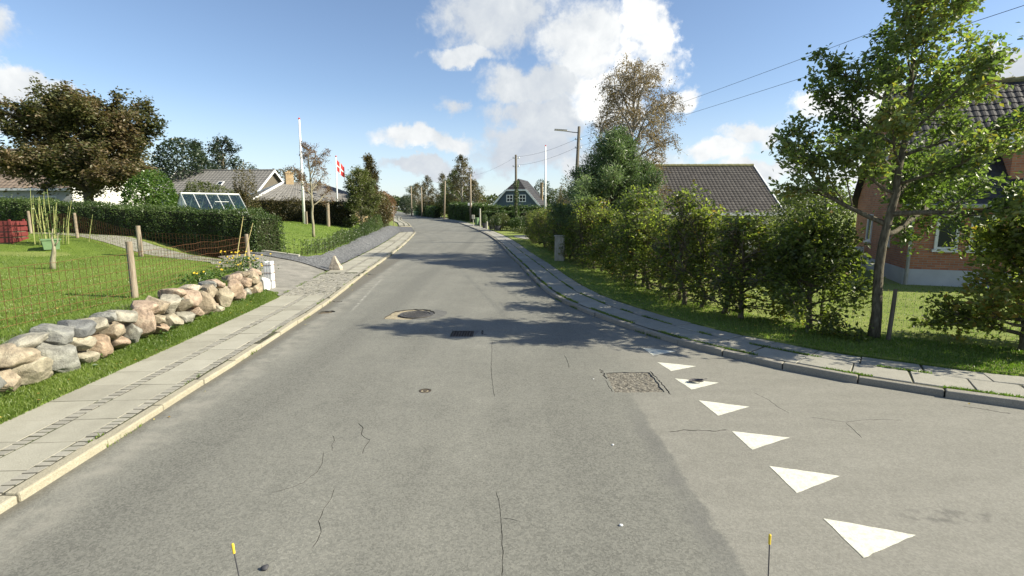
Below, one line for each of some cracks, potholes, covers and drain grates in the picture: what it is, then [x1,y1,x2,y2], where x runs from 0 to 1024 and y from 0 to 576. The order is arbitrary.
manhole cover [399,311,434,319]
crack [496,493,517,574]
crack [276,424,370,546]
